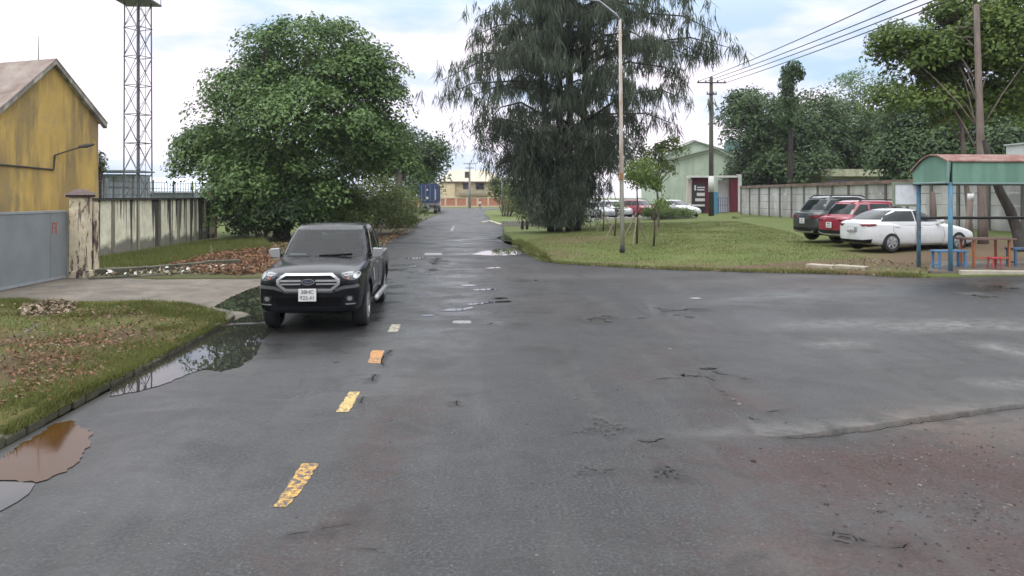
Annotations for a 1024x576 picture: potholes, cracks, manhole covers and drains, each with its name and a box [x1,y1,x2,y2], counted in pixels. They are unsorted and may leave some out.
pothole [831,531,907,548]
pothole [575,418,624,436]
pothole [654,466,680,479]
crack [660,367,779,420]
pothole [584,315,613,323]
